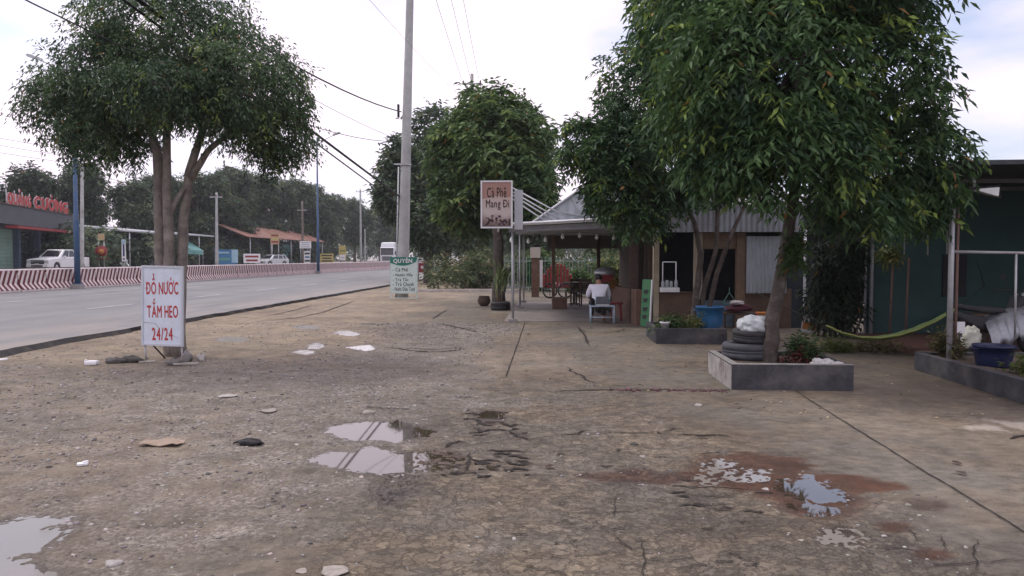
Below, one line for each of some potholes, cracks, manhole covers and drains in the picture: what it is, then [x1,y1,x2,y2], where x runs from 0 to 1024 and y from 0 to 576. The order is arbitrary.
pothole [742,466,894,529]
pothole [289,442,424,480]
pothole [463,408,515,427]
pothole [668,452,796,495]
crack [933,535,1018,569]
pothole [304,416,454,447]
